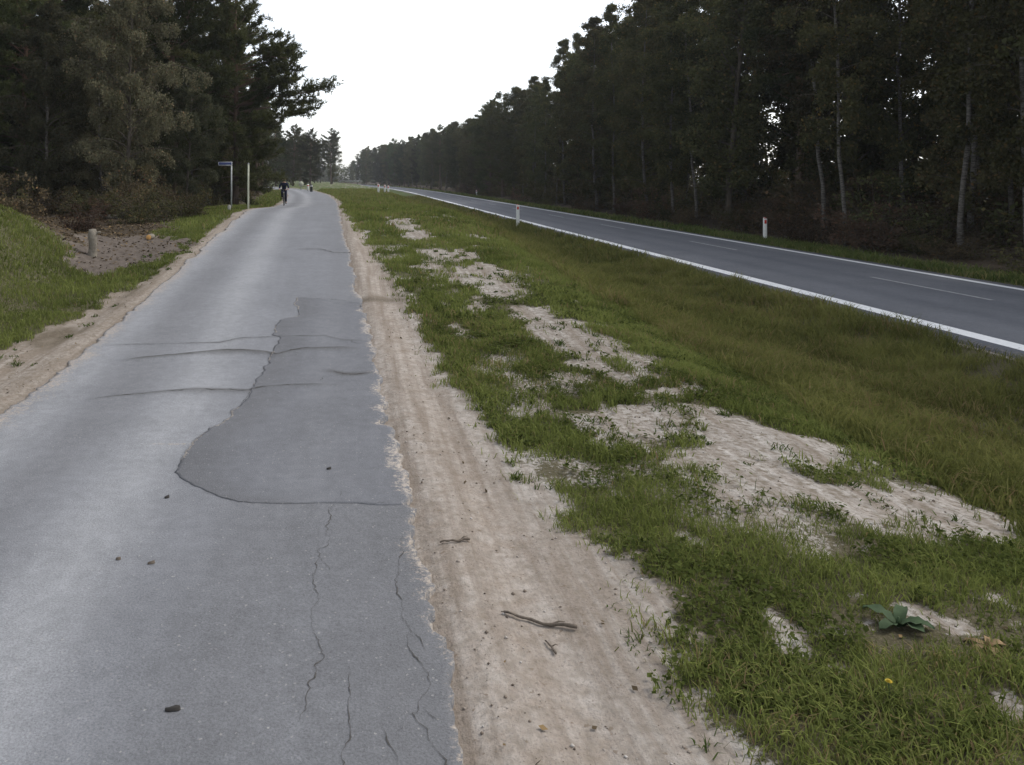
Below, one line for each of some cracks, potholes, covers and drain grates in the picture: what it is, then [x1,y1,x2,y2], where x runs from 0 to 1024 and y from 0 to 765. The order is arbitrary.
crack [200,488,383,716]
crack [111,298,362,465]
crack [384,536,447,765]
